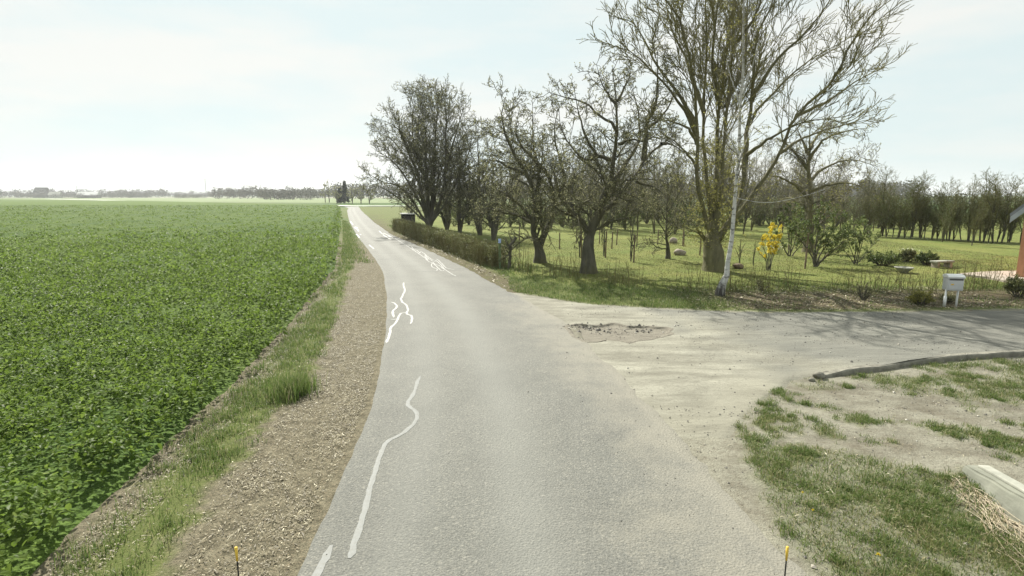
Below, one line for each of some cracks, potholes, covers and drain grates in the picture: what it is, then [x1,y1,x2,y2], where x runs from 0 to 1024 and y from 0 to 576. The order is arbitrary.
pothole [564,323,674,344]
